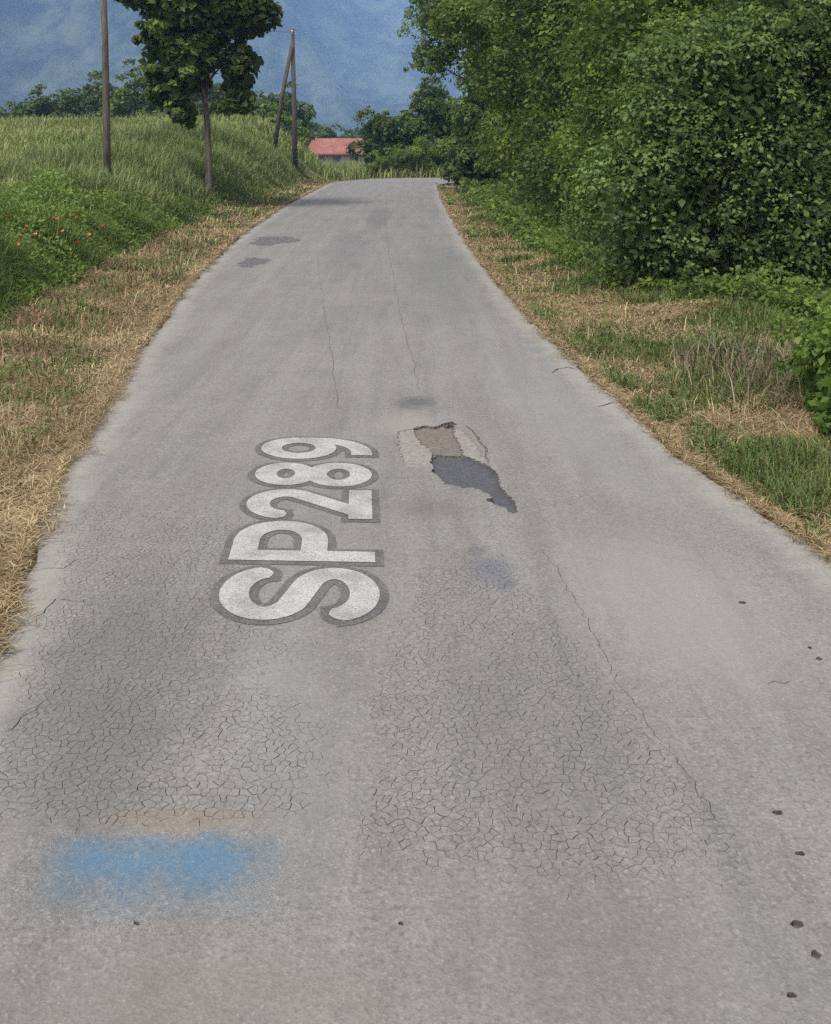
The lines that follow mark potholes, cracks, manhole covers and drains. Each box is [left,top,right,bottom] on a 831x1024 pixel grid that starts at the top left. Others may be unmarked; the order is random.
crack [318,267,340,410]
pothole [397,422,518,513]
crack [0,477,350,833]
crack [346,549,748,901]
crack [385,226,419,389]
